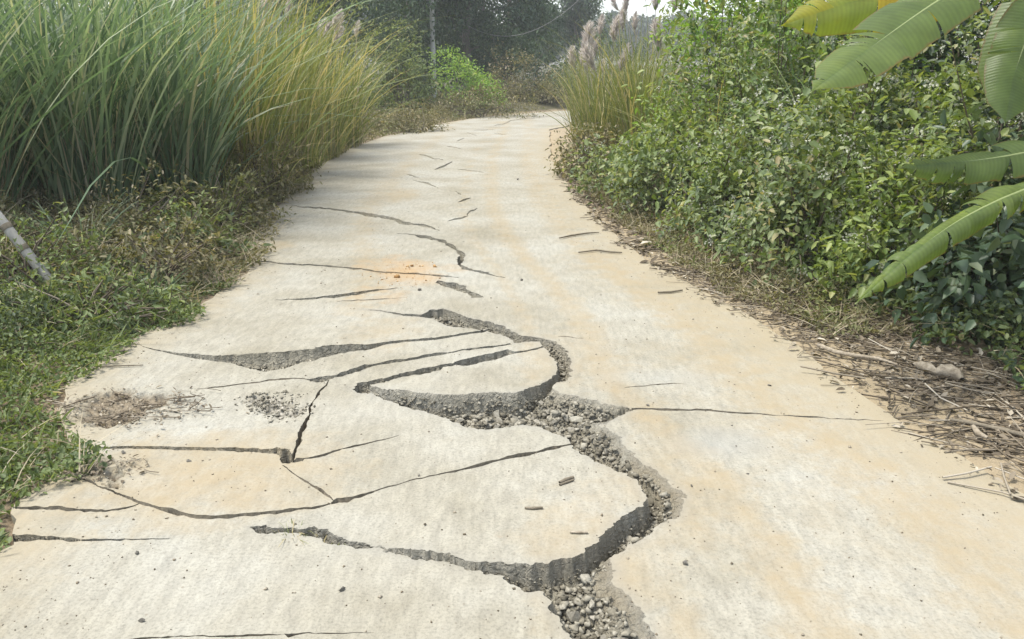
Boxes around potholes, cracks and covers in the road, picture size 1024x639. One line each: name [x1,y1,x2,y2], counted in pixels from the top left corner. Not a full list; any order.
crack [12,191,687,639]
